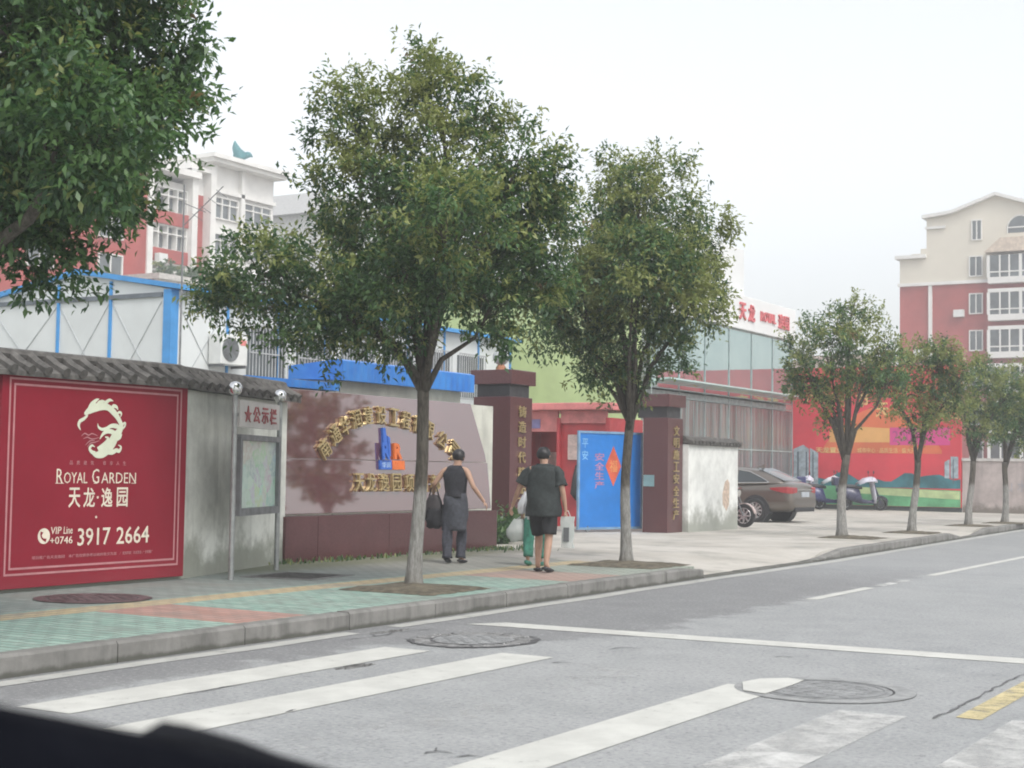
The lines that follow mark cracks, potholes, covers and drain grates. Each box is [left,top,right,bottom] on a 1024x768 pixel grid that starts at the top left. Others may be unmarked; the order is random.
manhole cover [406,632,541,648]
manhole cover [734,677,917,704]
manhole cover [240,572,353,581]
manhole cover [33,593,152,603]
